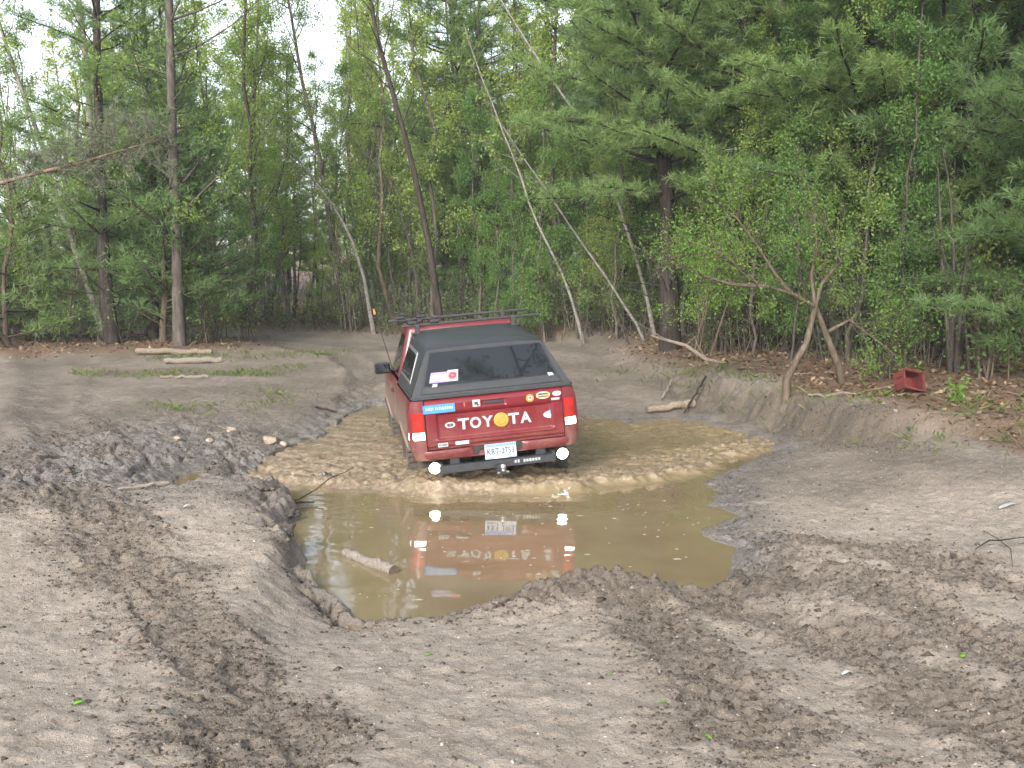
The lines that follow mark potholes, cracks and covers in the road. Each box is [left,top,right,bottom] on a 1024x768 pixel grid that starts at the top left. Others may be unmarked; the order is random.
pothole [242,402,781,626]
